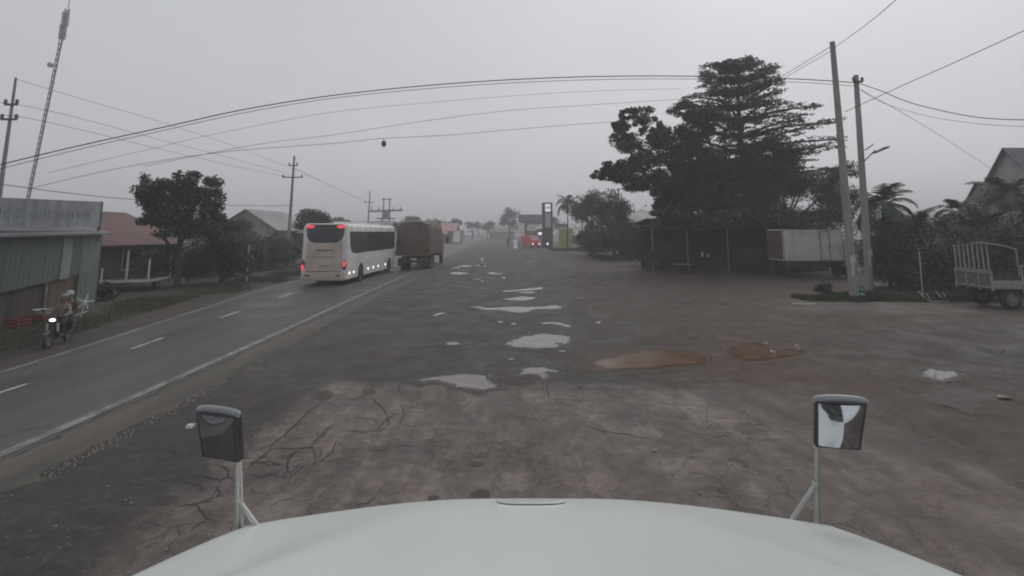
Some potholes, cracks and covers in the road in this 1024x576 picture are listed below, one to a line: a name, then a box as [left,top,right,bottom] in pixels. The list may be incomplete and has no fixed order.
pothole [712,341,818,364]
crack [165,383,421,530]
pothole [580,347,717,374]
